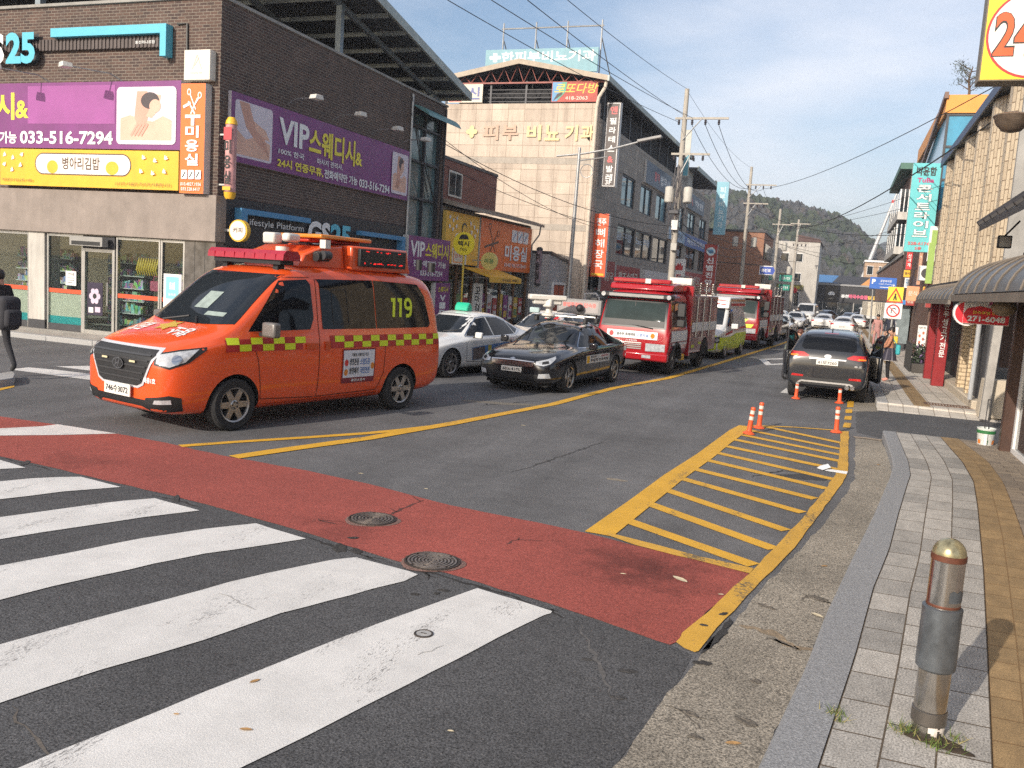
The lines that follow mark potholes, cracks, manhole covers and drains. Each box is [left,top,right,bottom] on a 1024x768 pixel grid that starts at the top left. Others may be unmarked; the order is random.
manhole cover [345,512,401,527]
manhole cover [401,551,466,572]
crack [390,496,423,515]
crack [580,624,613,700]
utility cover [414,629,433,638]
